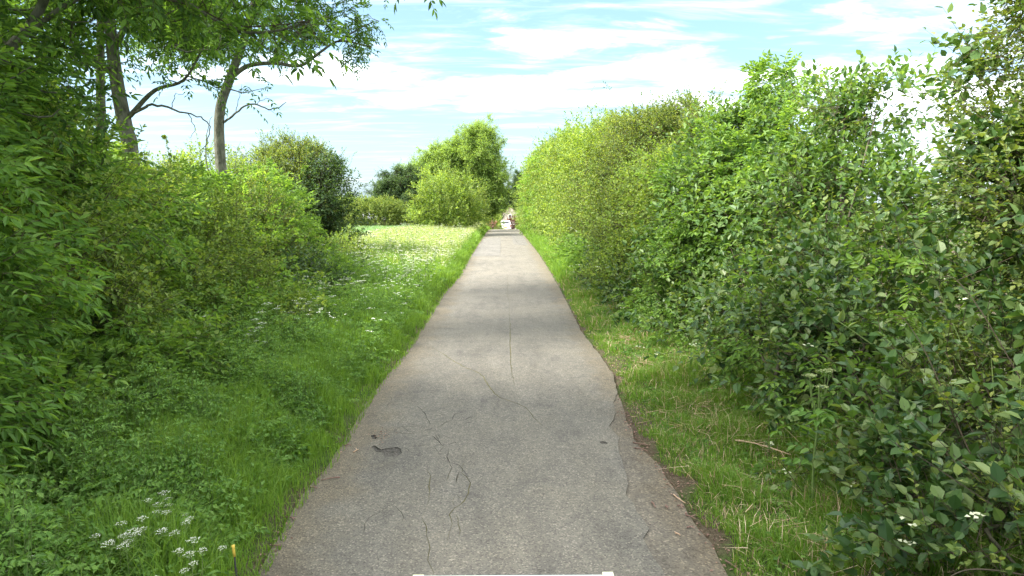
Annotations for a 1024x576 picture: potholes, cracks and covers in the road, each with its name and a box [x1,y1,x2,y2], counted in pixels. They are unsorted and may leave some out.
pothole [372,446,402,457]
crack [387,398,471,573]
crack [427,279,542,425]
